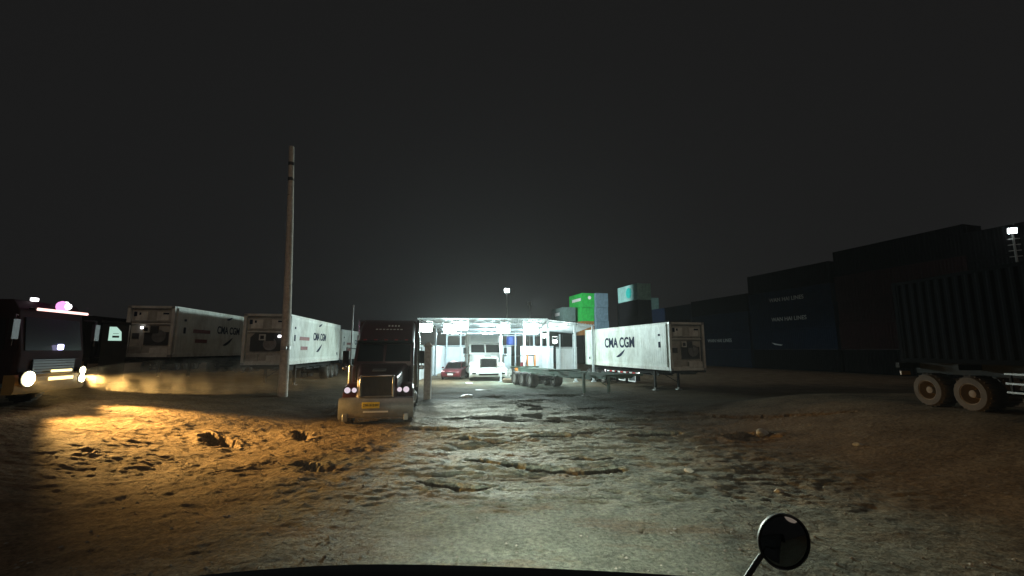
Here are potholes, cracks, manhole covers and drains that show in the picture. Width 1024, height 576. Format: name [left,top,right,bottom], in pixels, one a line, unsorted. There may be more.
pothole [187,430,254,451]
pothole [66,444,108,457]
pothole [278,429,321,445]
pothole [510,402,551,410]
pothole [281,459,352,476]
pothole [710,431,798,444]
